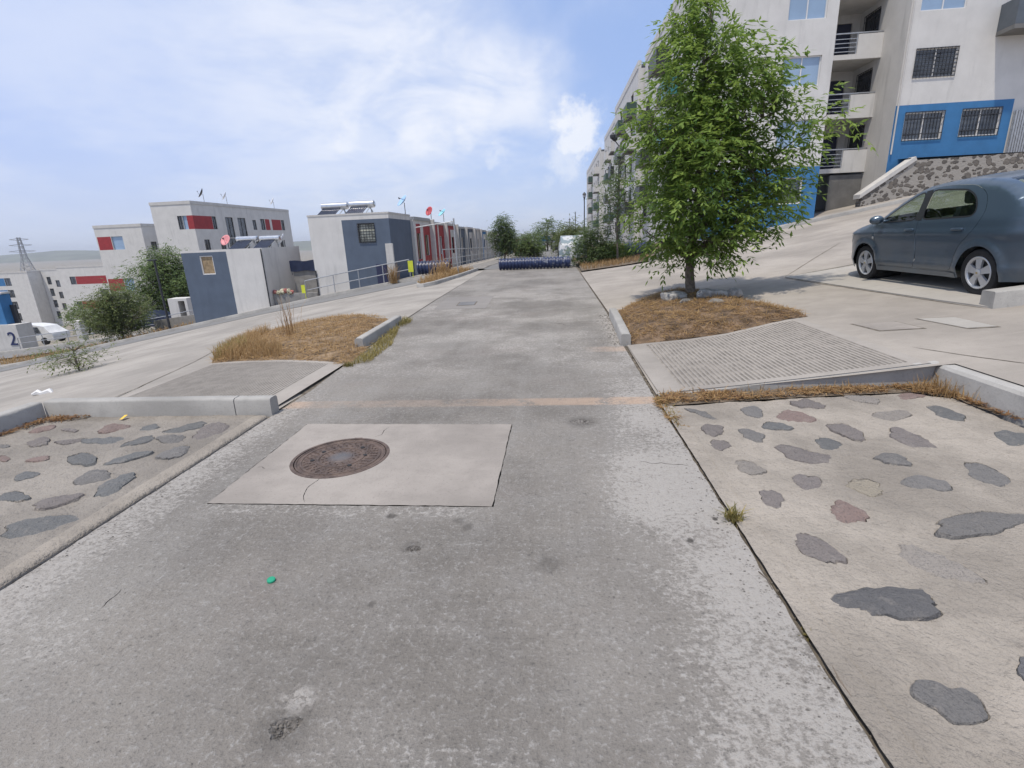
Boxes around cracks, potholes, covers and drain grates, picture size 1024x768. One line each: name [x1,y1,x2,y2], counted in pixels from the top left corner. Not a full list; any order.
pothole [268,717,304,741]
manhole cover [915,317,1000,329]
manhole cover [290,438,390,480]
manhole cover [852,321,926,331]
